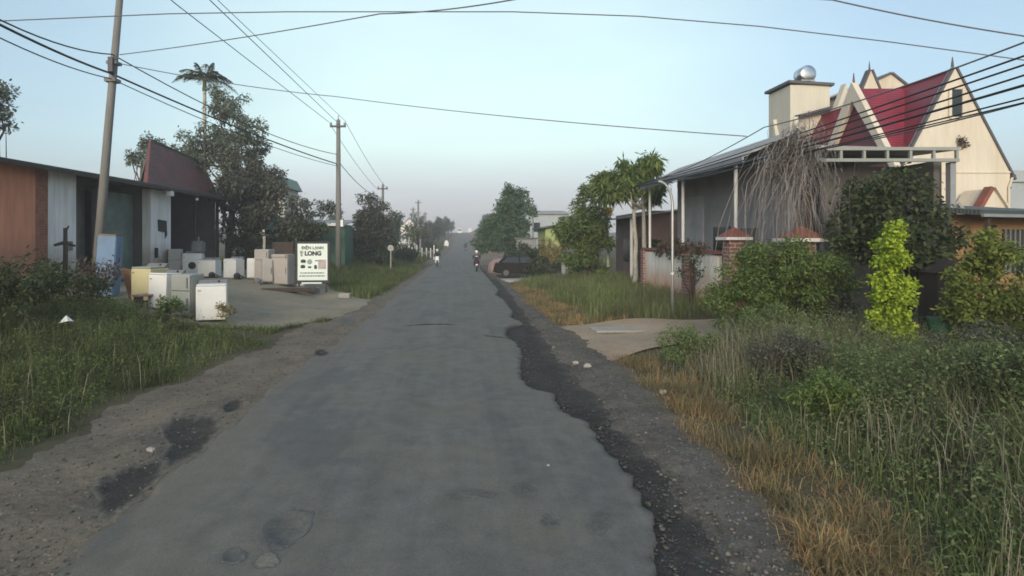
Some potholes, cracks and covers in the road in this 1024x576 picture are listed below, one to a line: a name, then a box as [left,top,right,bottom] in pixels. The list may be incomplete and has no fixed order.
pothole [221,547,248,564]
pothole [251,508,315,552]
pothole [221,398,243,413]
